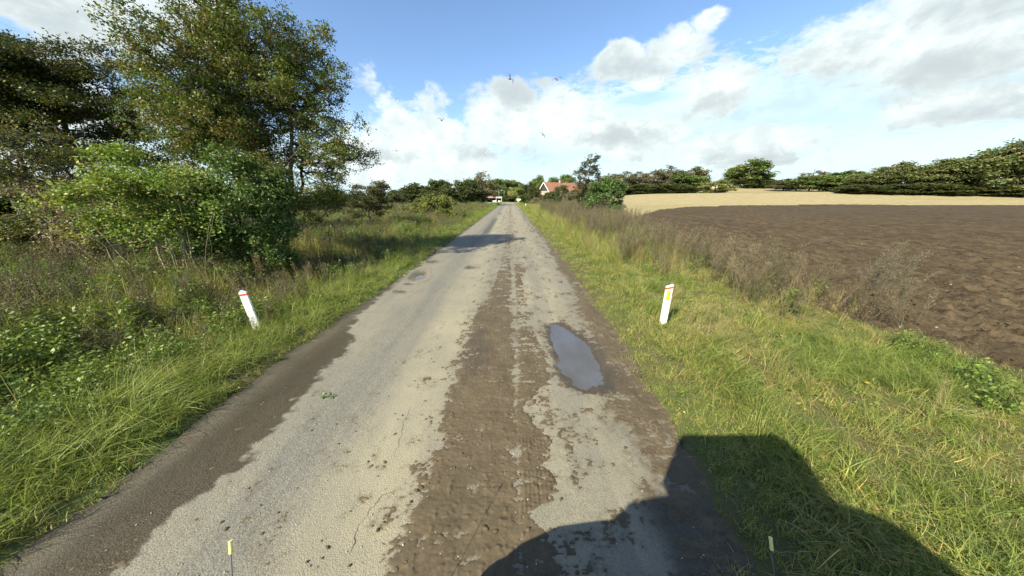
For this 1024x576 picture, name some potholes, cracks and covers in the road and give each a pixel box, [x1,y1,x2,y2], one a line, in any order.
pothole [405,267,432,284]
